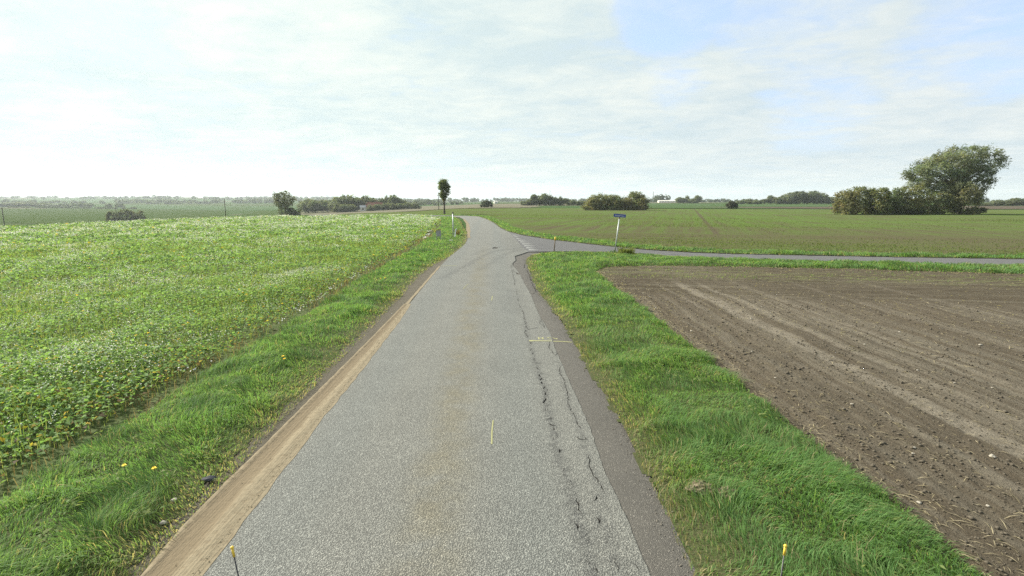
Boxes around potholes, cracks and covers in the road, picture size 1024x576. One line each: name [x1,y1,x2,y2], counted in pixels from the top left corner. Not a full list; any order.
crack [511,264,640,575]
